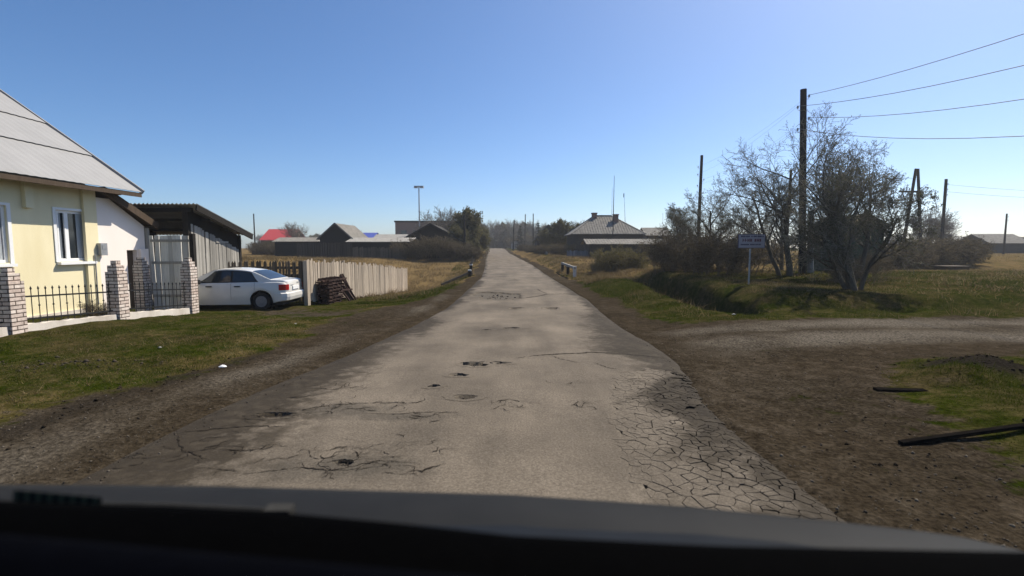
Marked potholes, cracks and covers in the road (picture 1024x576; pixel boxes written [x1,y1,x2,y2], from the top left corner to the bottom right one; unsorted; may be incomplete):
pothole [319,456,367,470]
crack [113,372,457,475]
pothole [455,360,496,368]
pothole [468,291,526,301]
crack [518,352,847,523]
pothole [443,393,488,401]
